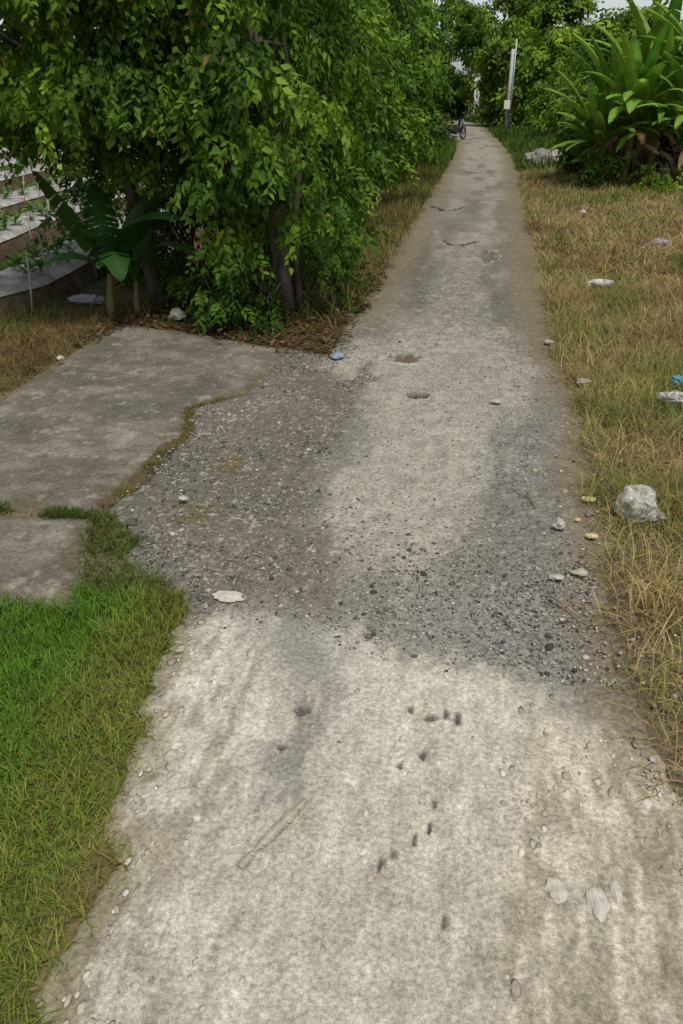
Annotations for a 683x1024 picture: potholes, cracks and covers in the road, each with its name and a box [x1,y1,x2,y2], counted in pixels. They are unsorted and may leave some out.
pothole [388,352,426,364]
pothole [404,391,432,399]
